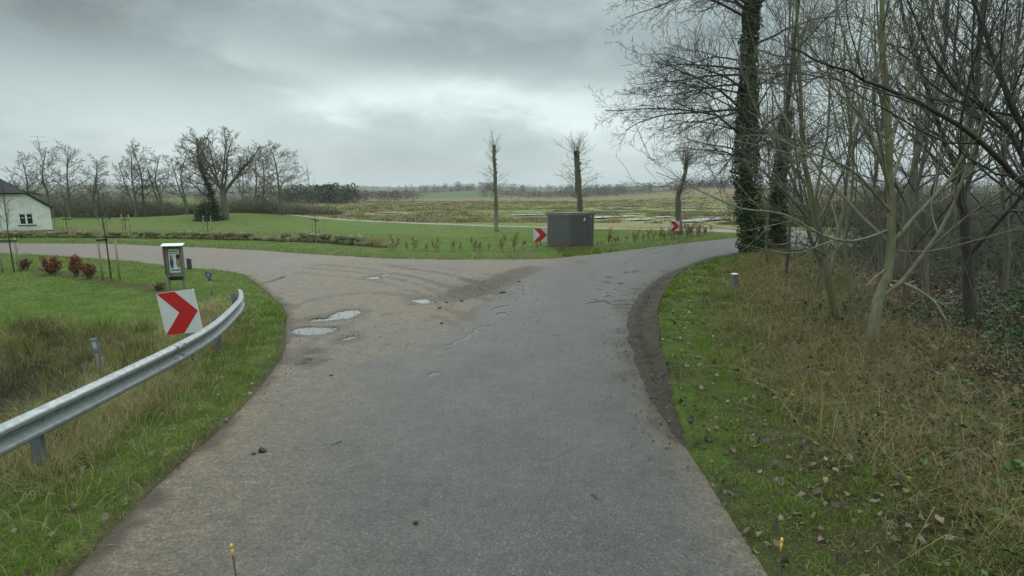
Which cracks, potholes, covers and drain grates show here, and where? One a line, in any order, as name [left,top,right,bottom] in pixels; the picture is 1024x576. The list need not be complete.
pothole [291,326,339,335]
pothole [308,309,362,322]
